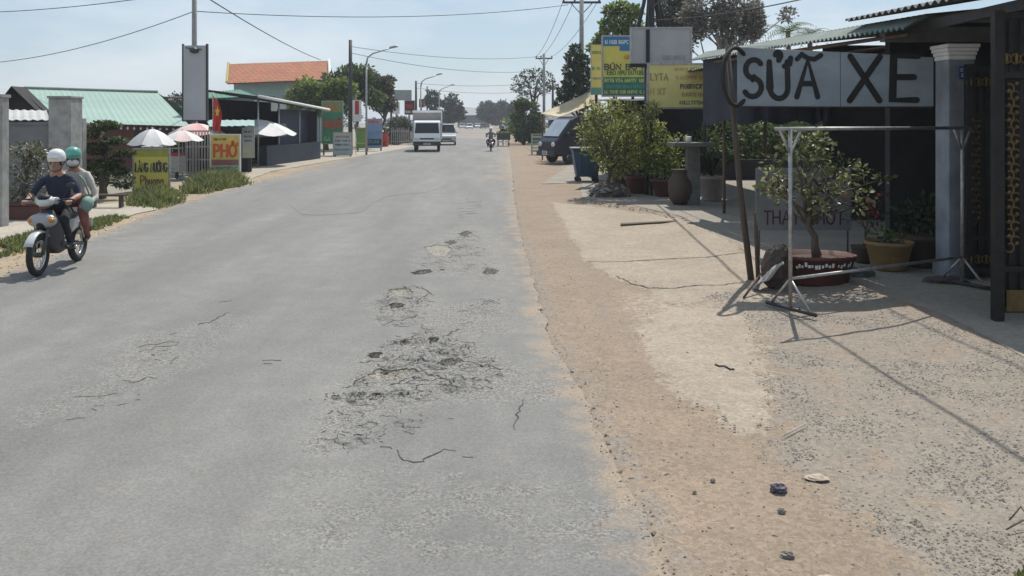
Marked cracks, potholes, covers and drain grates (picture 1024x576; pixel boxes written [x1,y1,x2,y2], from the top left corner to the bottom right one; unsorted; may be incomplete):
crack [618,276,744,288]
crack [67,377,152,420]
pothole [387,287,421,296]
crack [321,286,504,462]
pothole [424,244,456,257]
